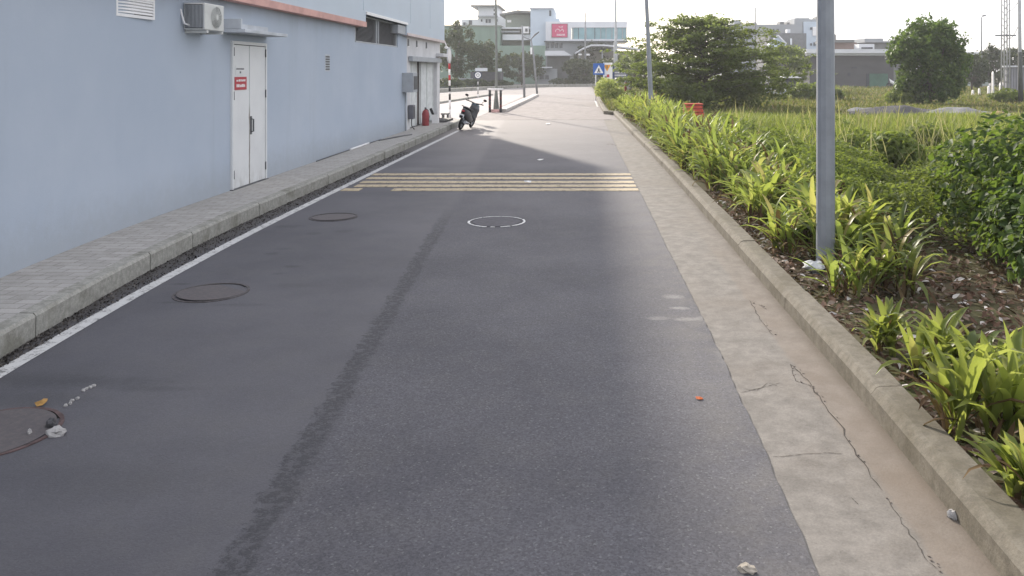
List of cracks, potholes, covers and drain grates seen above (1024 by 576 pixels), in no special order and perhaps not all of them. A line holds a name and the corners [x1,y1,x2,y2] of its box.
crack [745,364,941,572]
manhole cover [0,407,65,456]
manhole cover [171,283,250,303]
manhole cover [308,213,358,222]
